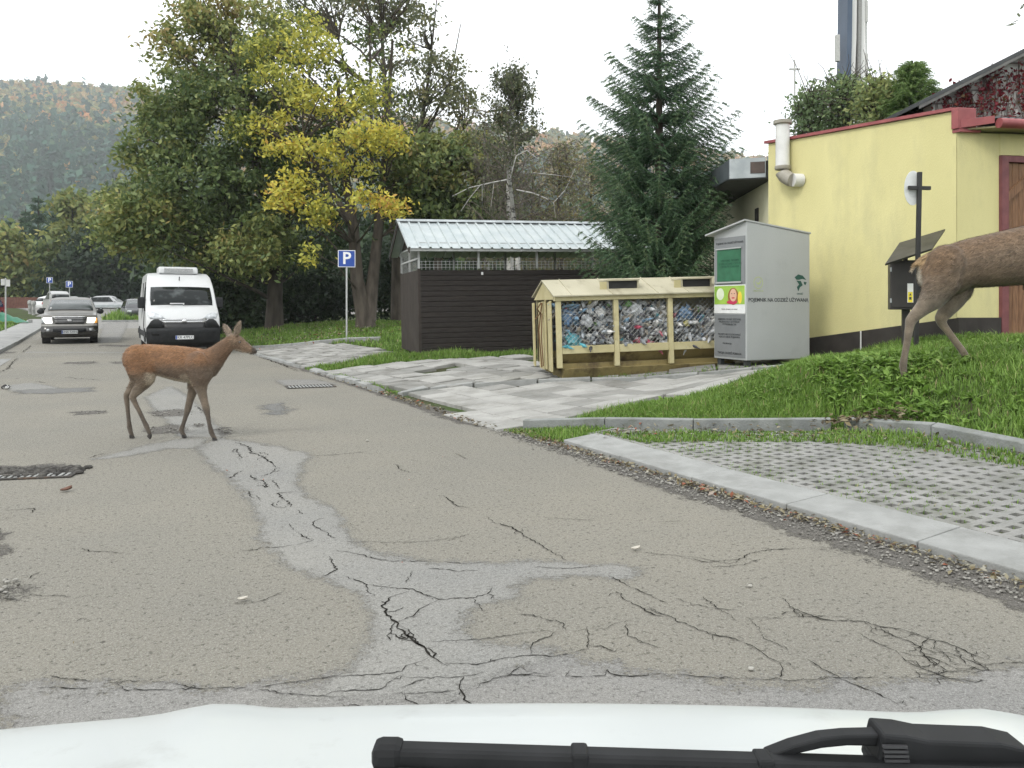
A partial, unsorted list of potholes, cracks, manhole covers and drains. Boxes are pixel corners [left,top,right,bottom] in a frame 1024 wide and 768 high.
crack [39,443,1017,706]
drain grate [0,465,93,480]
